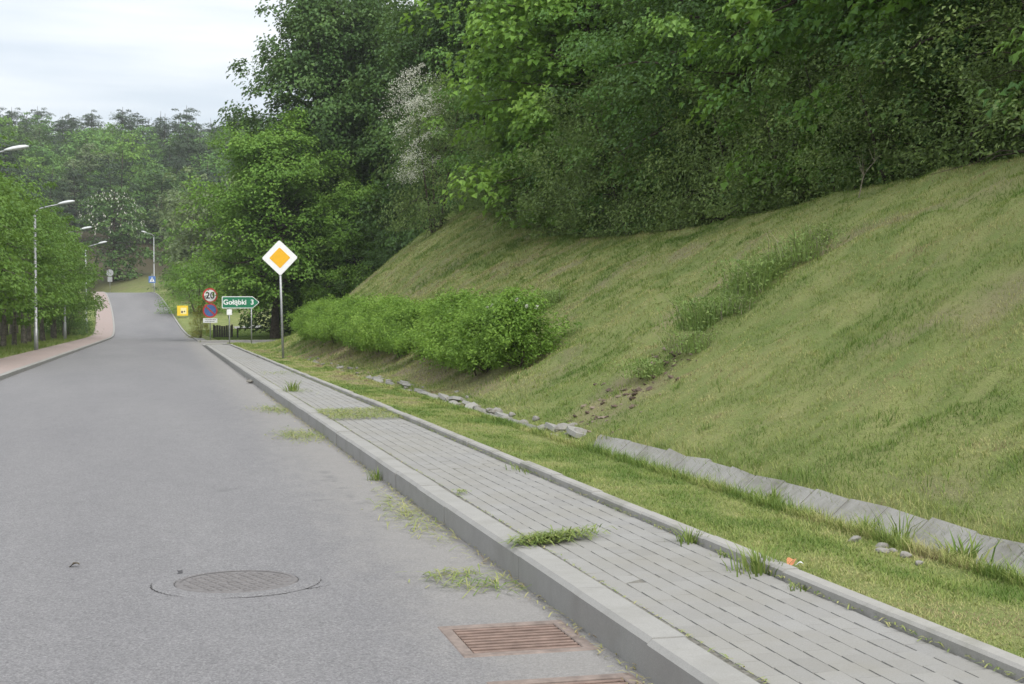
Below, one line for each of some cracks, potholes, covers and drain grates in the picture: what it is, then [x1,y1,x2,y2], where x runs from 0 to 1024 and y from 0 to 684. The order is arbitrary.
drain grate [486,673,644,684]
drain grate [437,620,599,658]
manhole cover [152,567,321,598]
